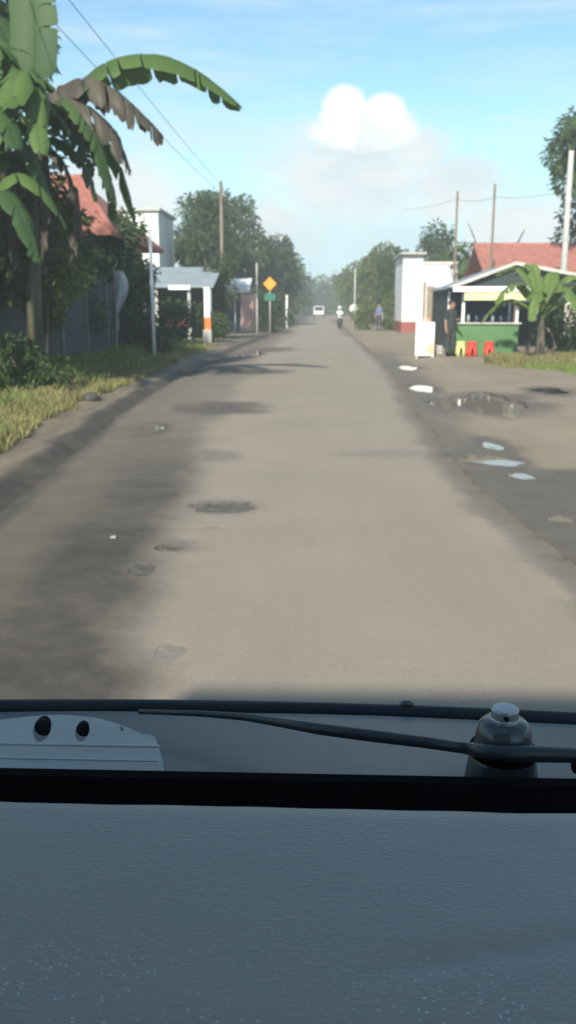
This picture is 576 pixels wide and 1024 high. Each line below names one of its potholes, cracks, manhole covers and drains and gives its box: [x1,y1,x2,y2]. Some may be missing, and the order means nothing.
pothole [507,472,537,480]
pothole [480,441,504,450]
pothole [454,454,526,466]
pothole [426,399,454,409]
pothole [127,563,156,577]
pothole [187,501,259,513]
pothole [450,392,529,417]
pothole [154,642,189,659]
pothole [408,383,439,393]
